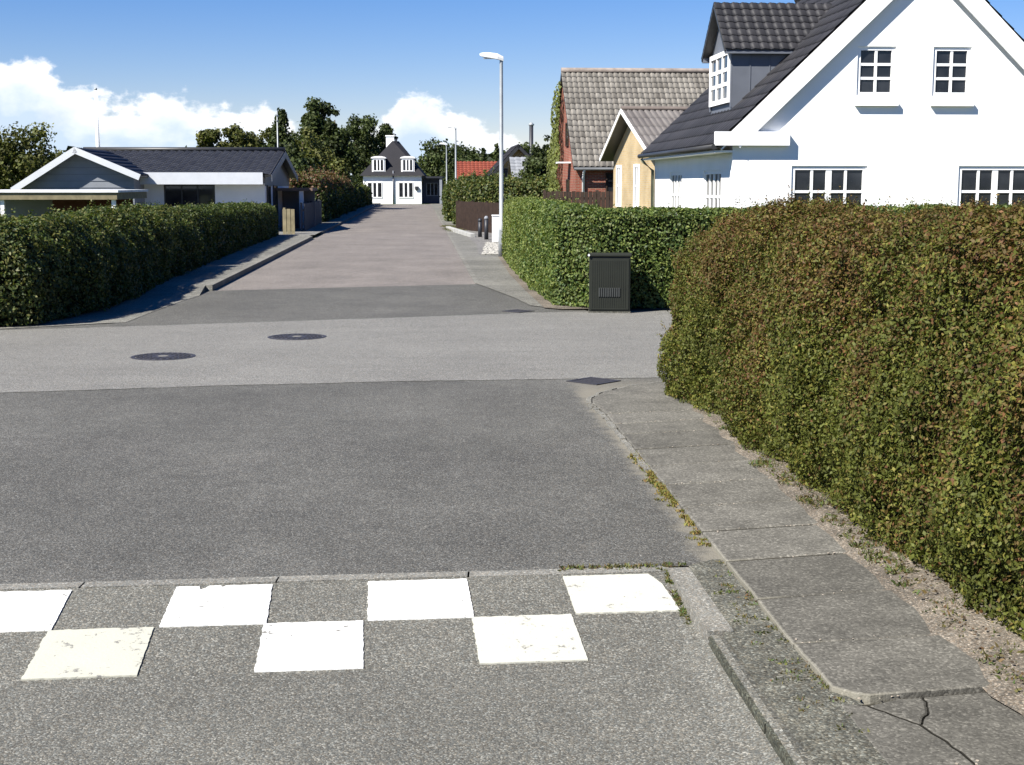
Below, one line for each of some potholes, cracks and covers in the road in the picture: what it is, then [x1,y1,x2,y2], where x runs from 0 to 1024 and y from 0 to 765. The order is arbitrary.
manhole cover [130,352,196,361]
crack [867,697,976,765]
